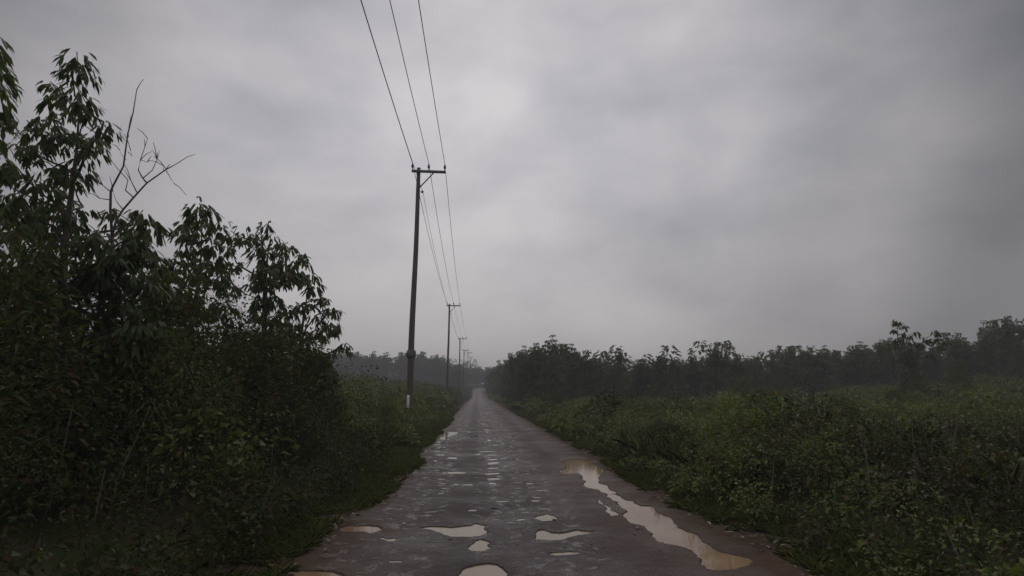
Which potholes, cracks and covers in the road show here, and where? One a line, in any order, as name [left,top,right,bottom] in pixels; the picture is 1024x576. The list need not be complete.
pothole [420,523,488,537]
pothole [456,563,508,576]
pothole [535,529,596,540]
pothole [467,539,492,551]
pothole [436,431,458,440]
